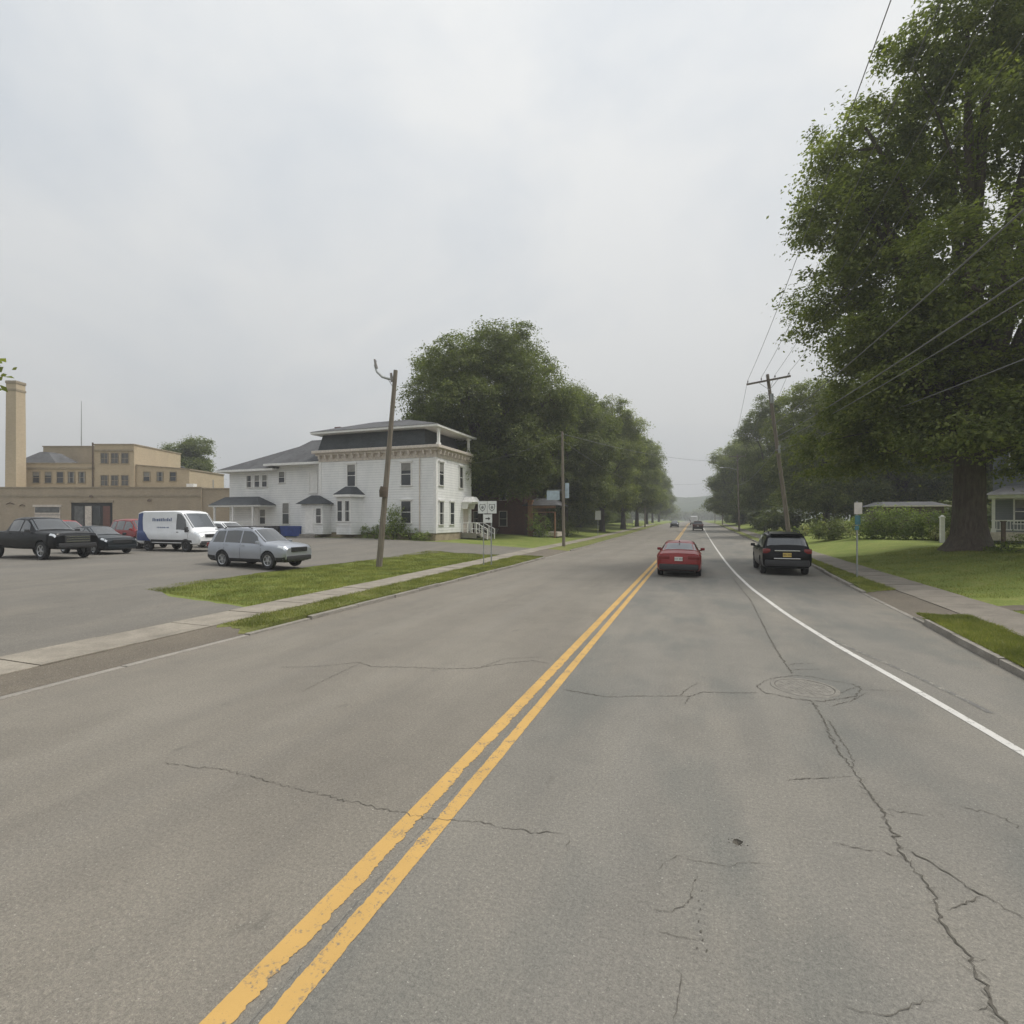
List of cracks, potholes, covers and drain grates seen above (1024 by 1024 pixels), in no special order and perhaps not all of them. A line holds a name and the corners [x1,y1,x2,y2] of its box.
crack [564,675,1023,1024]
crack [307,657,550,689]
crack [163,762,570,851]
manhole cover [770,678,840,698]
